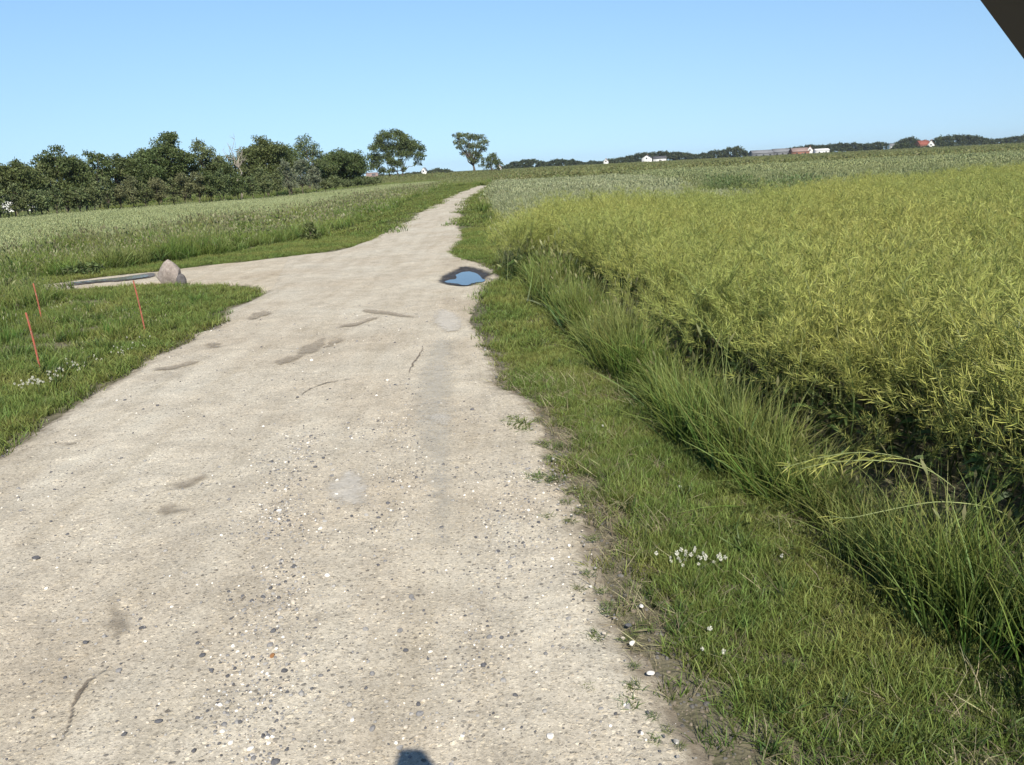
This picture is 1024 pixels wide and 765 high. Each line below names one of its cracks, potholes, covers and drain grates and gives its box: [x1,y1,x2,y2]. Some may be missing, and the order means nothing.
crack [64,670,104,733]
pothole [439,267,491,286]
